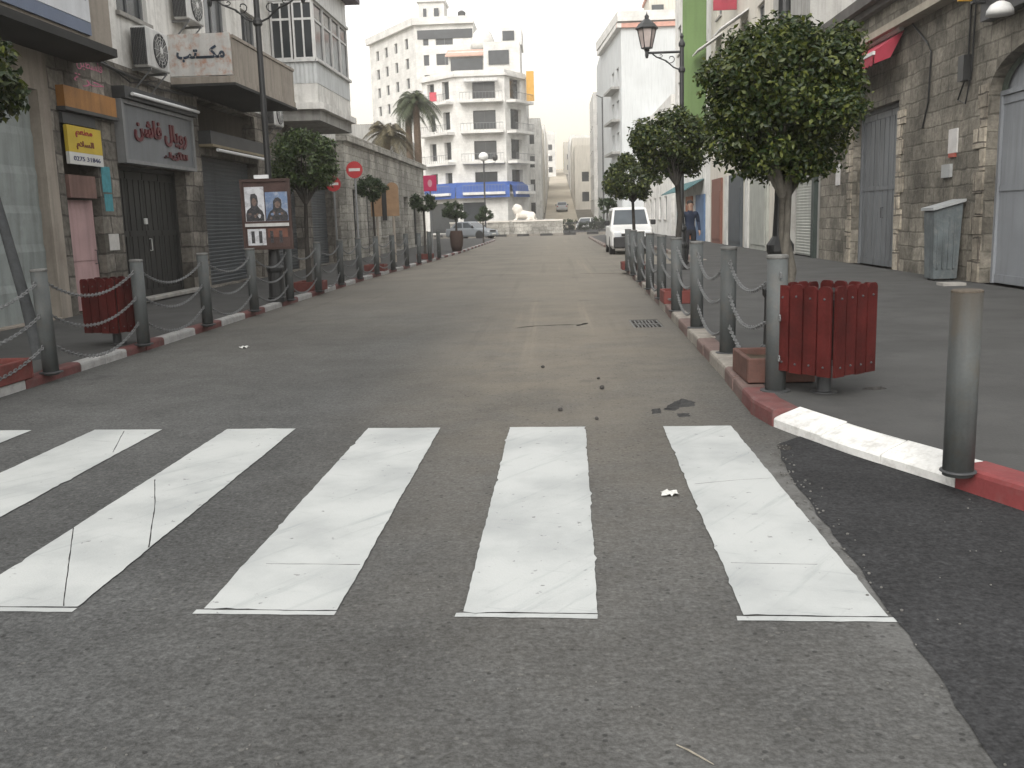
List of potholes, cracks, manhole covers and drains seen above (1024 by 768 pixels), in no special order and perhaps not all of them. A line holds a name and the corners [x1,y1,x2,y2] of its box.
drain grate [629,319,664,328]
pothole [651,398,696,417]
crack [148,480,156,547]
crack [63,527,74,607]
